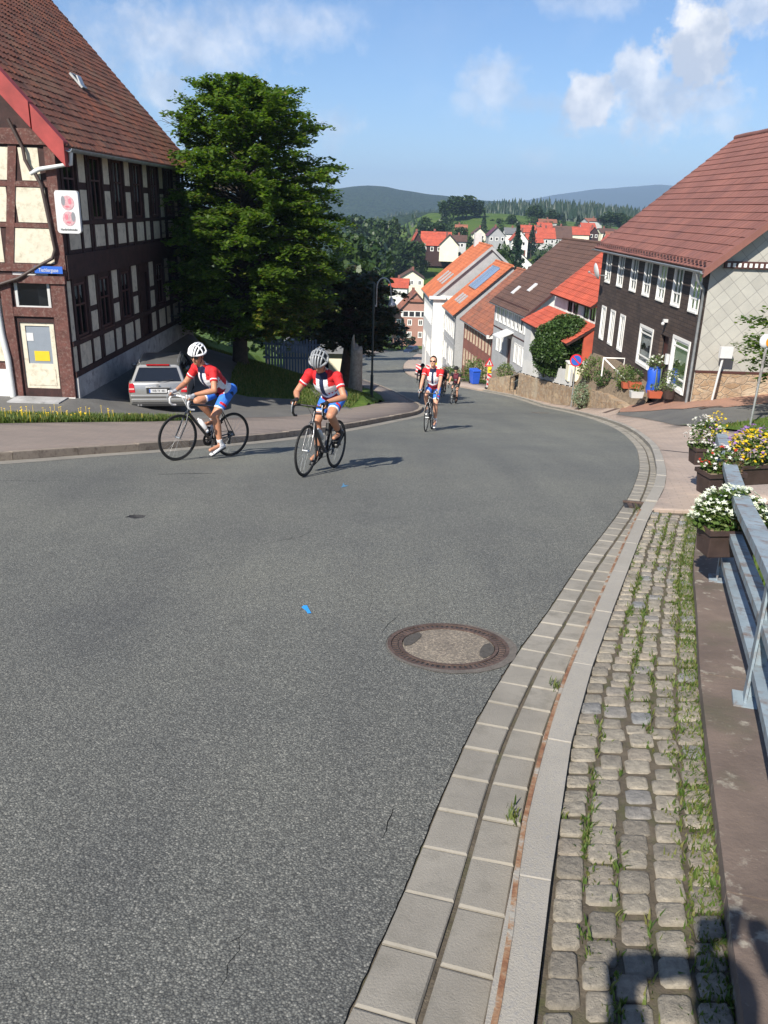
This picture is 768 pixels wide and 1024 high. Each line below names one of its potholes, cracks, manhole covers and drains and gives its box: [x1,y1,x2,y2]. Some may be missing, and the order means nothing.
manhole cover [386,623,510,670]
crack [217,932,245,992]
drain grate [623,500,644,510]
